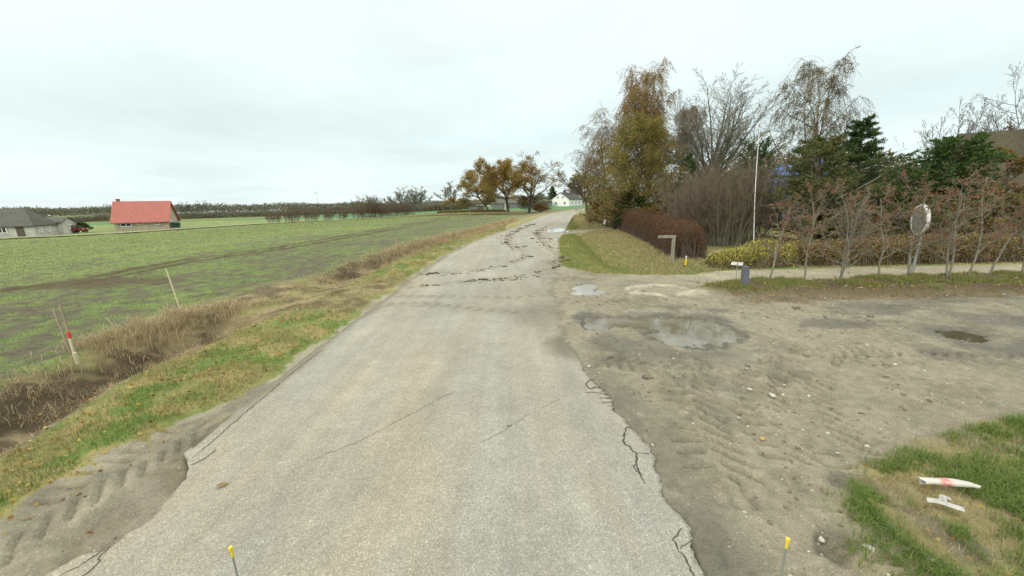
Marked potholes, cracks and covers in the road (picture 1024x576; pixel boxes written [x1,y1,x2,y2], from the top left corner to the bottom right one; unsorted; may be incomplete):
crack [60,546,111,576]
crack [672,528,695,576]
crack [191,350,322,465]
crack [622,427,649,484]
pothole [568,282,609,296]
pothole [926,327,994,343]
pothole [580,314,746,349]
